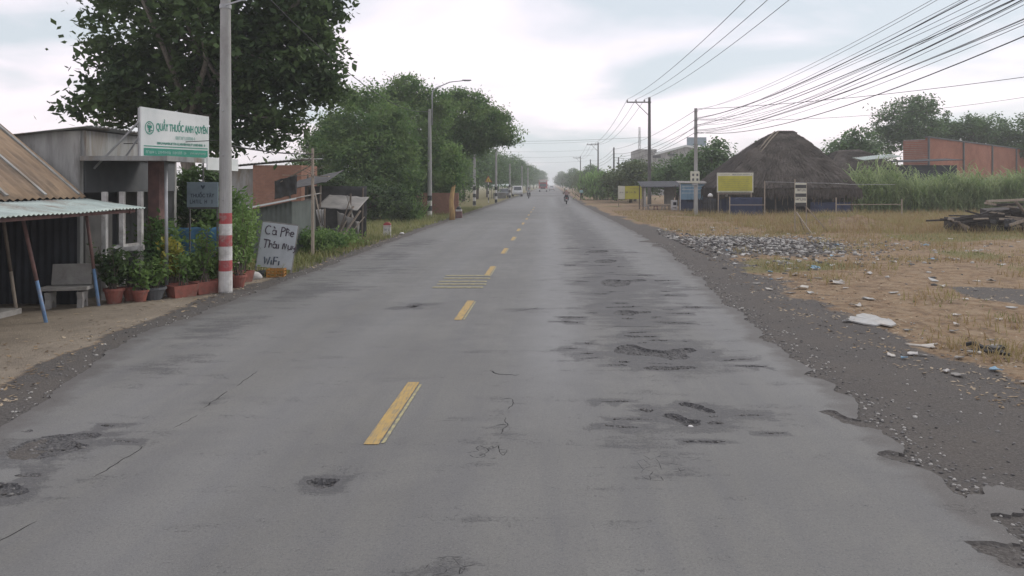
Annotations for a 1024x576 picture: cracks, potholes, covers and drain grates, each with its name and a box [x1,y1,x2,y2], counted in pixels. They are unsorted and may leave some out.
crack [94,373,255,477]
pothole [0,482,30,498]
pothole [576,272,683,296]
crack [424,556,475,576]
pothole [305,478,340,489]
pothole [563,332,767,370]
crack [469,398,514,459]
pothole [964,541,1024,568]
pothole [556,302,702,324]
pothole [819,410,910,433]
pothole [601,400,784,443]
pothole [5,424,141,477]
